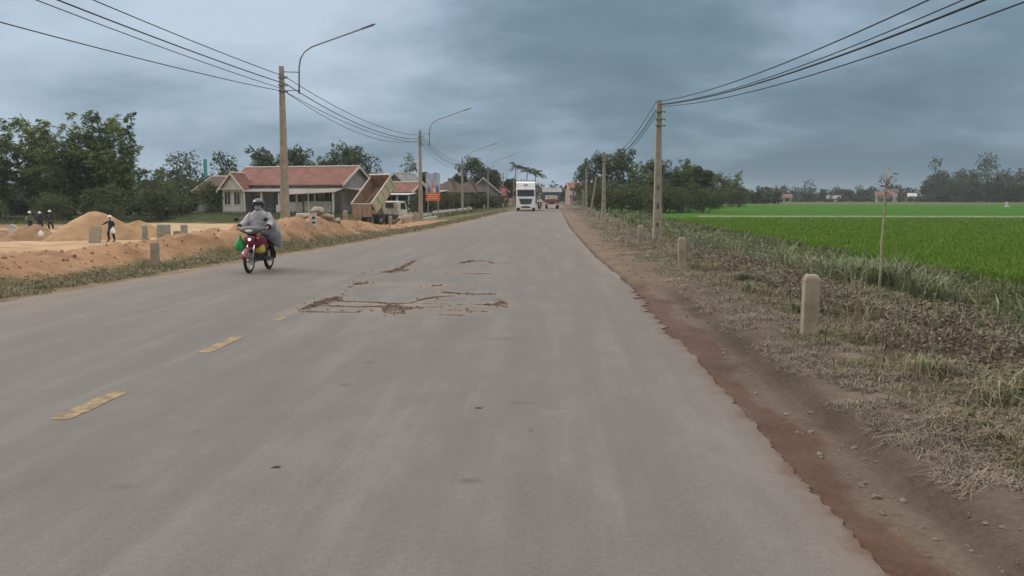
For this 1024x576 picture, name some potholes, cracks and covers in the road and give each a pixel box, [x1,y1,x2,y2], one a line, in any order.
crack [301,286,497,316]
pothole [381,305,416,314]
